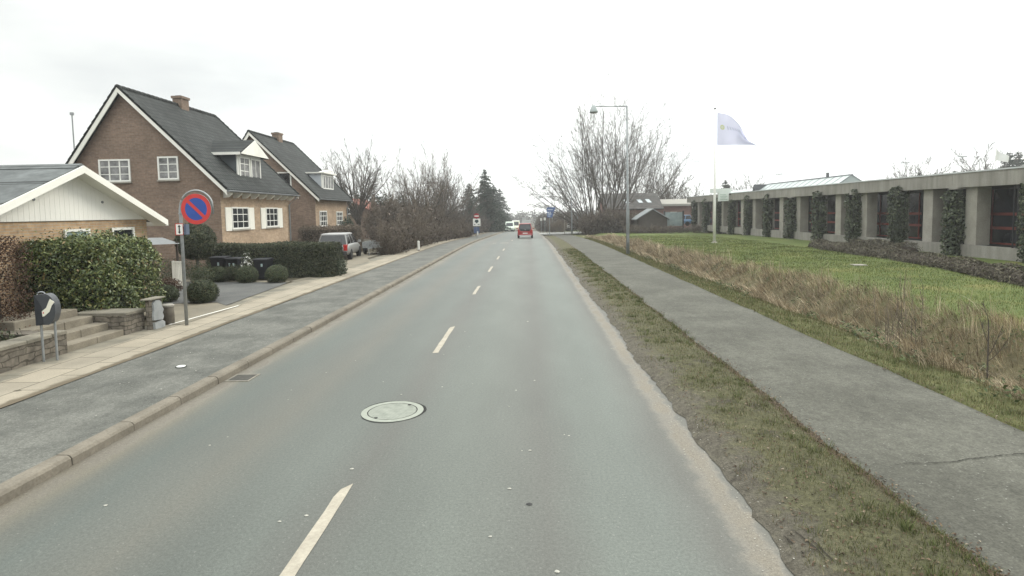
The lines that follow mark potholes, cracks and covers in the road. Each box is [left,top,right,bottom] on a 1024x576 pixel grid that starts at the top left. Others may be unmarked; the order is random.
crack [897,453,1024,465]
manhole cover [361,401,427,423]
drain grate [224,374,260,382]
